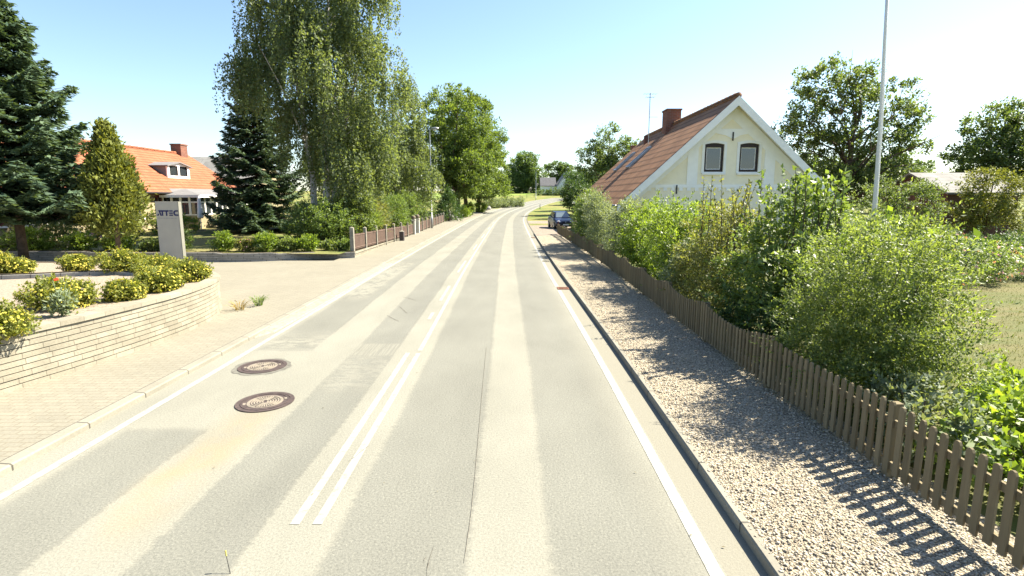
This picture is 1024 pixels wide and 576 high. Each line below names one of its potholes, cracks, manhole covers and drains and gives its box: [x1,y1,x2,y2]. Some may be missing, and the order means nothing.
manhole cover [235,392,295,413]
manhole cover [231,358,292,375]
